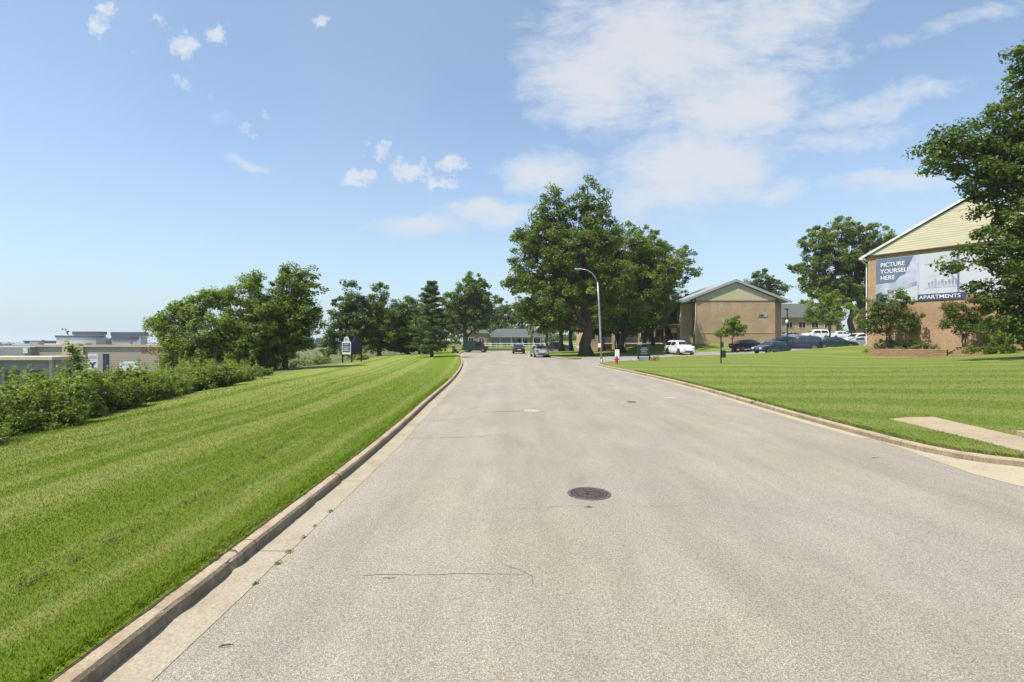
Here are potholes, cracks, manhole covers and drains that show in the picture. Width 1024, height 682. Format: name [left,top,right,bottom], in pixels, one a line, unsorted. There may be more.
manhole cover [567,487,611,501]
